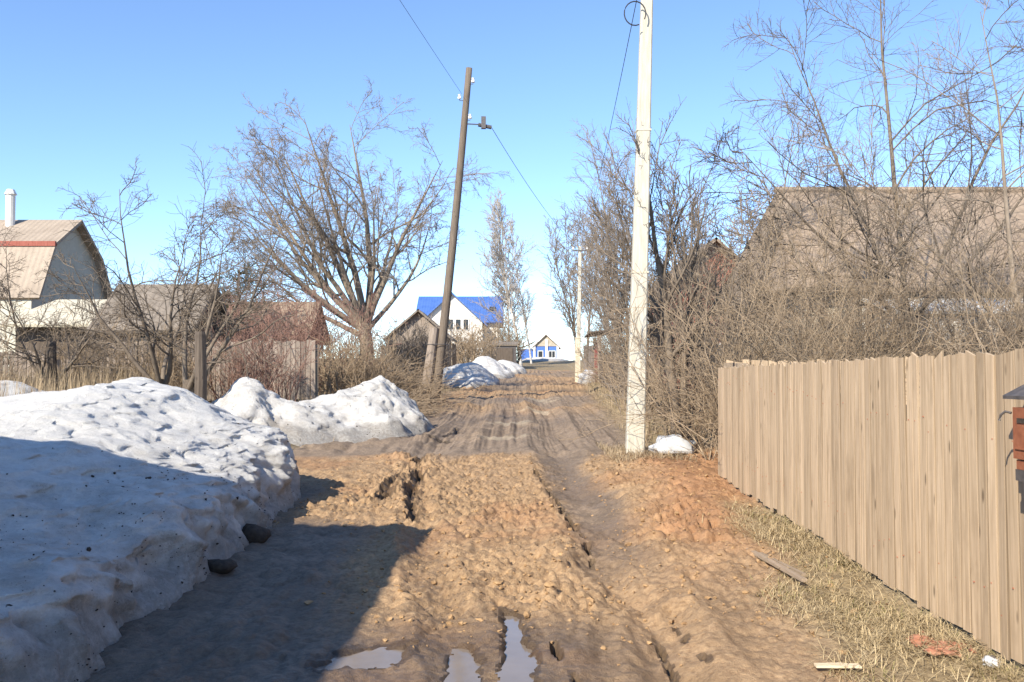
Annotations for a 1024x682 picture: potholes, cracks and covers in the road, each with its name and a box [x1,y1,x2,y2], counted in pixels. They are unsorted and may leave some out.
pothole [303,638,425,674]
pothole [439,642,488,682]
pothole [495,606,545,682]
